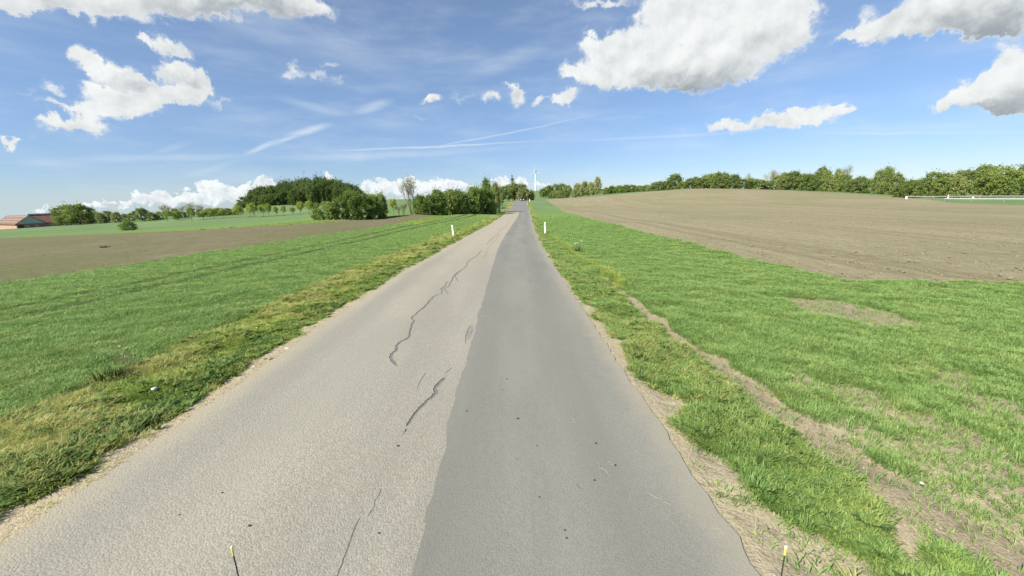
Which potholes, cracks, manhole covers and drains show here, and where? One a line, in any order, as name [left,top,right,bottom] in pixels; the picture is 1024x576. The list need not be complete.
crack [389,222,509,435]
crack [337,490,381,576]
